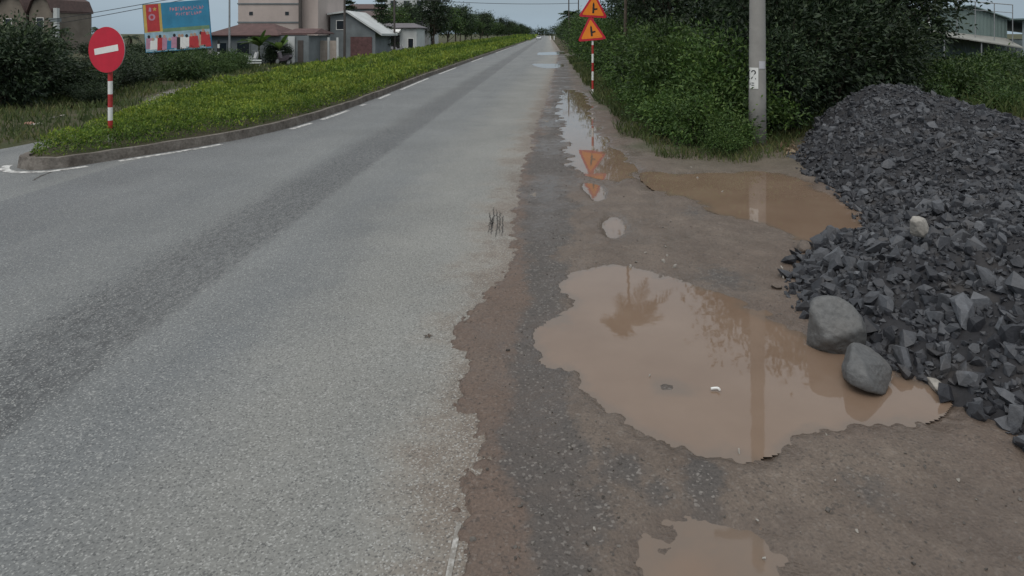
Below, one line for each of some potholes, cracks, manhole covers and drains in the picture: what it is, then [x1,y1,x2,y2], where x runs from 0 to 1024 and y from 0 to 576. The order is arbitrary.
pothole [575,180,617,203]
pothole [639,169,862,243]
pothole [527,261,953,464]
pothole [611,490,827,576]
pothole [555,89,639,182]
pothole [589,211,637,241]
